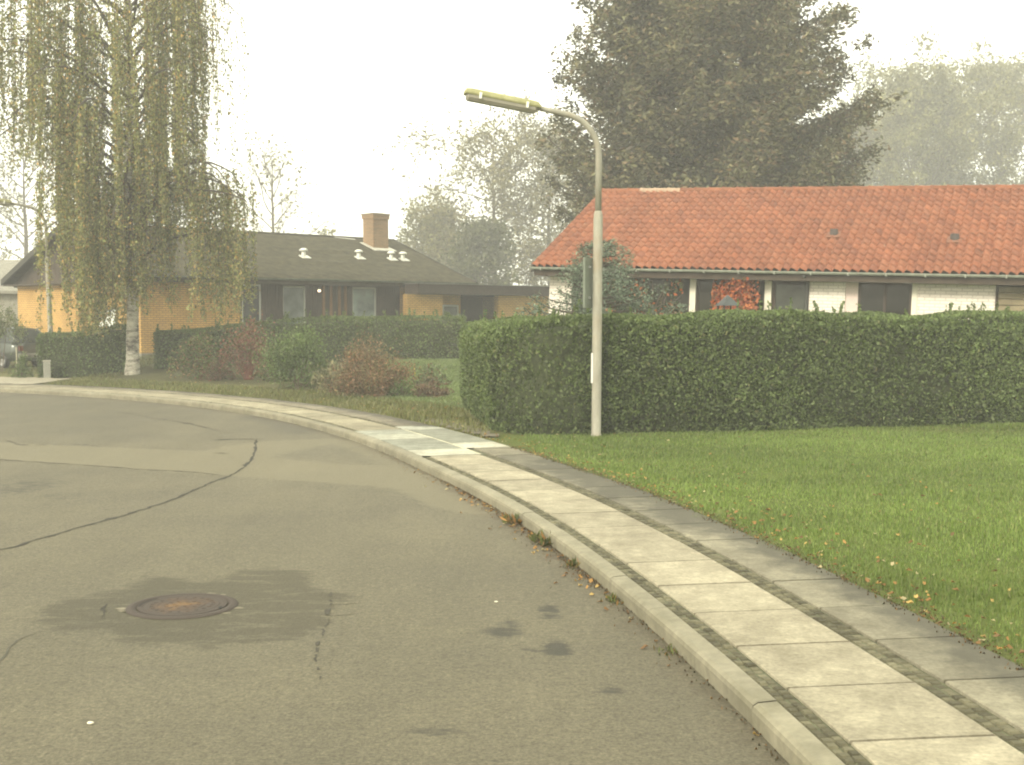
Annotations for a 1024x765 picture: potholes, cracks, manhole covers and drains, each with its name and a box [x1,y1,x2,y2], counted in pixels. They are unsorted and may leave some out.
manhole cover [115,593,244,620]
crack [314,592,359,679]
crack [3,412,258,549]
